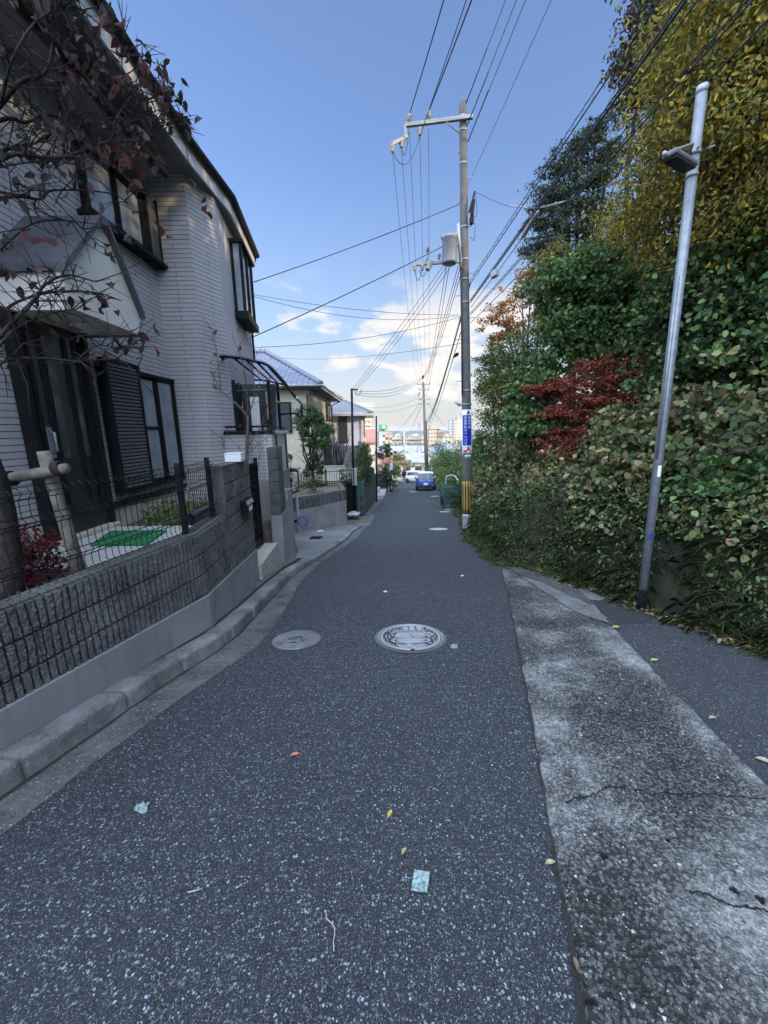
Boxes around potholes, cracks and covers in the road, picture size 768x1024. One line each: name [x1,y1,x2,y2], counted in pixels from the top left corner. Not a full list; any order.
crack [566,786,766,803]
manhole cover [272,630,321,650]
manhole cover [375,624,446,653]
crack [689,890,768,913]
